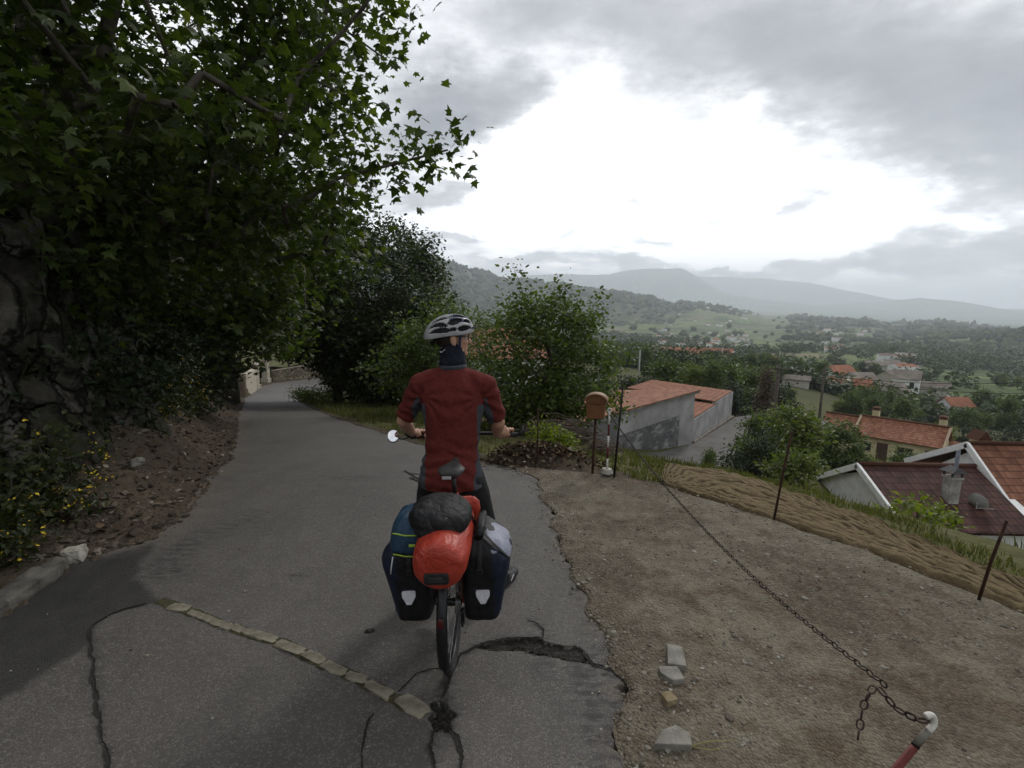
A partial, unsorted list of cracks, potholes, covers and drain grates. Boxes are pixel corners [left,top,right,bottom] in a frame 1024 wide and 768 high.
pothole [478,637,587,663]
crack [361,713,374,768]
crack [88,603,146,768]
crack [428,727,464,768]
